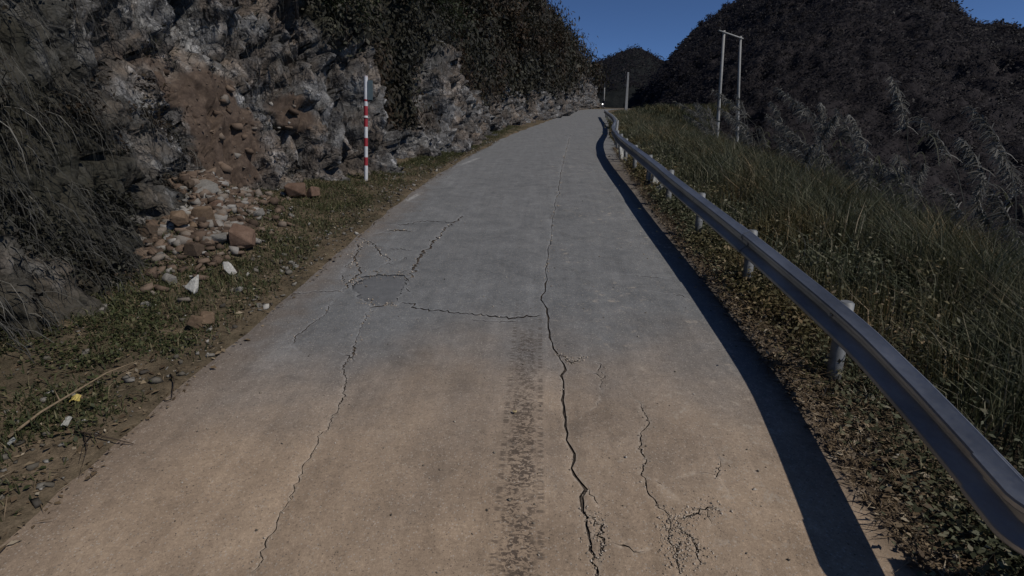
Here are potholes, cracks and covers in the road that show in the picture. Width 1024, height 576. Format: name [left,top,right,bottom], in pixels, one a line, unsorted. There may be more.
crack [639,407,717,573]
crack [294,139,644,576]
crack [255,313,367,570]
